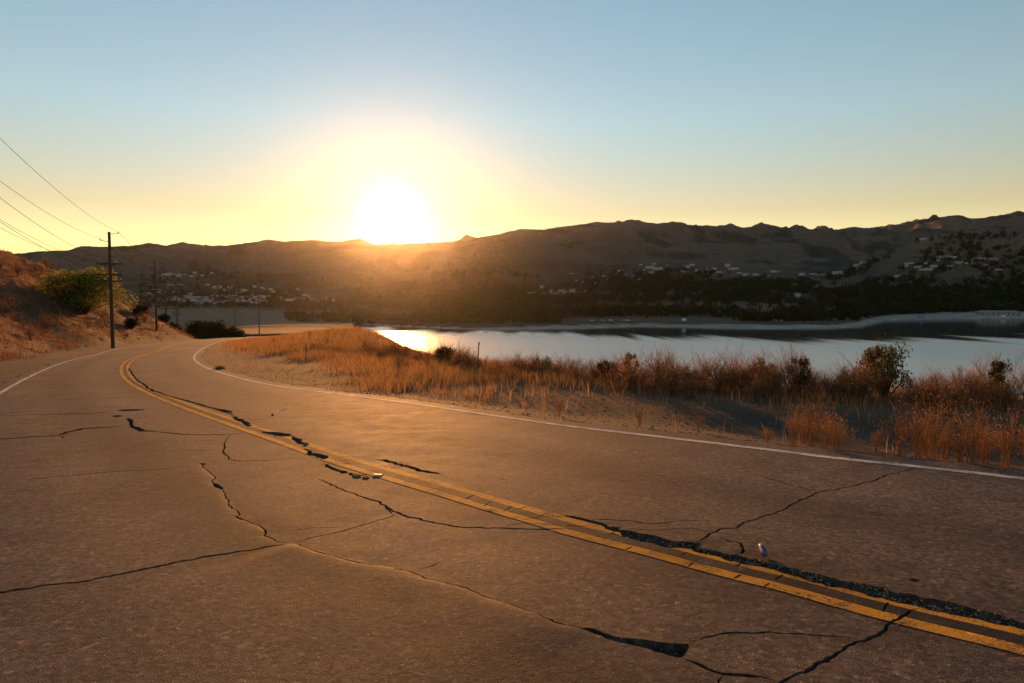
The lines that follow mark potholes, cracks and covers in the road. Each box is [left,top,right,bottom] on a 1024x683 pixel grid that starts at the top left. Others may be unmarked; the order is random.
crack [0,368,1024,683]
